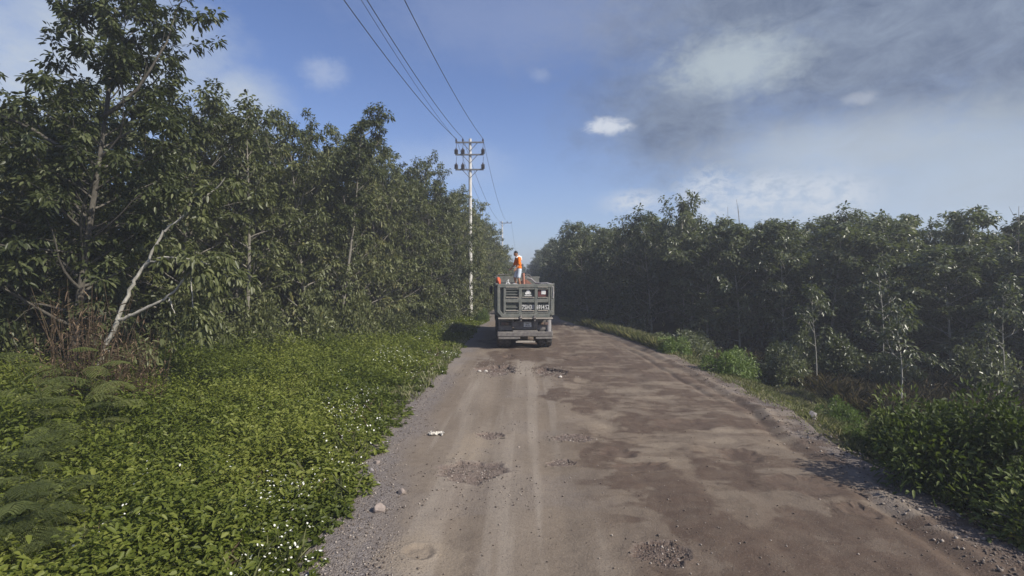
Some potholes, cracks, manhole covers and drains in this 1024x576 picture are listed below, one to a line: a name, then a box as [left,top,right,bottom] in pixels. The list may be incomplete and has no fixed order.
pothole [469,431,509,442]
pothole [531,366,575,378]
pothole [395,541,443,564]
pothole [465,363,523,380]
pothole [618,536,703,575]
pothole [539,458,583,468]
pothole [424,456,524,491]
pothole [541,433,601,444]
